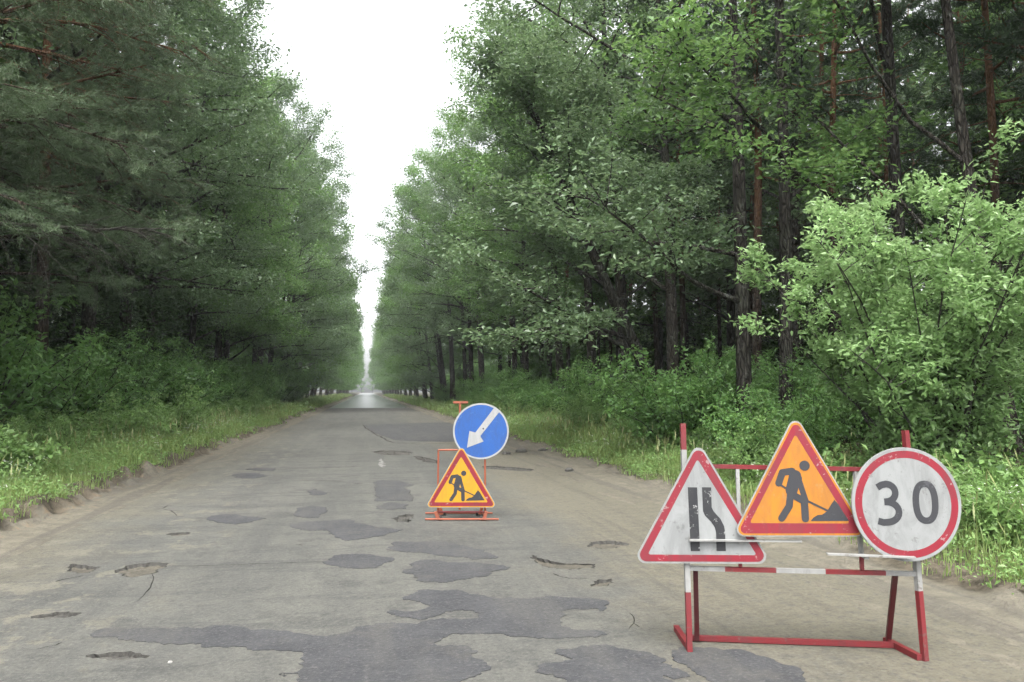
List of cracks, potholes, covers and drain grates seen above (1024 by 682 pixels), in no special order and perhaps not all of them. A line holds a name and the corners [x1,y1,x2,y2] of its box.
pothole [79,651,150,660]
pothole [587,540,629,549]
pothole [31,611,82,619]
pothole [115,562,169,577]
pothole [530,555,596,570]
crack [140,562,304,599]
pothole [66,564,99,573]
